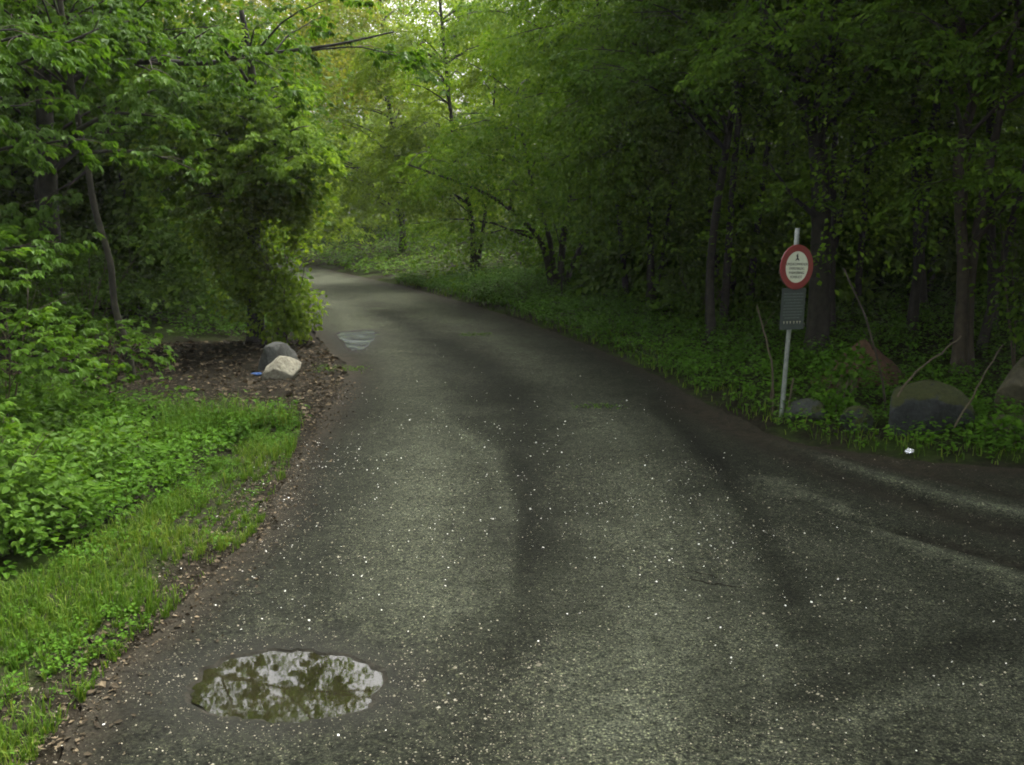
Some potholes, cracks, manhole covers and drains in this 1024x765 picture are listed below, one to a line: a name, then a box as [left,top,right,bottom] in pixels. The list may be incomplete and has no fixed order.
pothole [334,330,380,353]
pothole [183,648,388,724]
crack [682,570,742,588]
